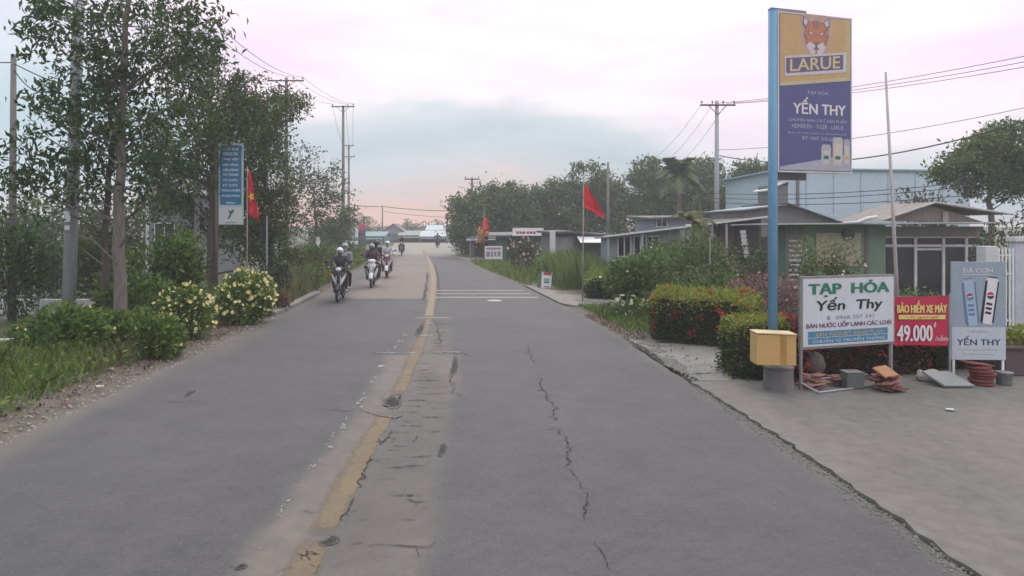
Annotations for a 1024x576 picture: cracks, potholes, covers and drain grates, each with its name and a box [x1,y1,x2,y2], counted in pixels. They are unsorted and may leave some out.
pothole [318,535,340,546]
pothole [382,394,402,409]
pothole [450,355,459,378]
crack [325,321,469,520]
